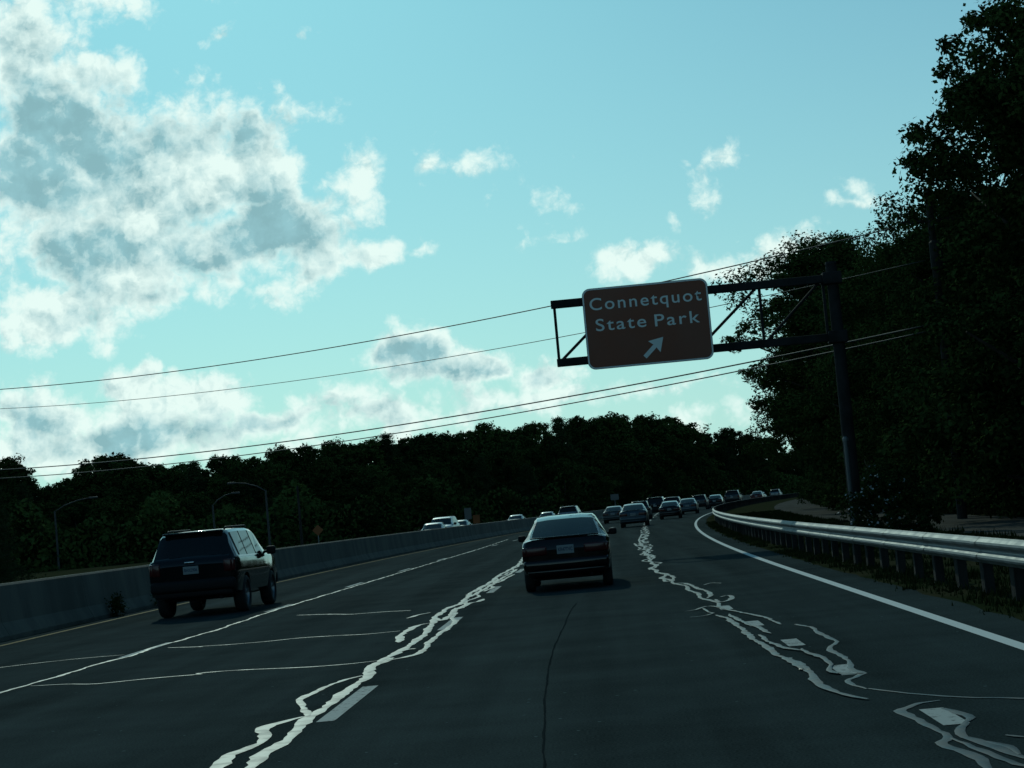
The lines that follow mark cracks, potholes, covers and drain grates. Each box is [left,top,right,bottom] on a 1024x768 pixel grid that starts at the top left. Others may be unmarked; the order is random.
crack [542,603,577,768]
